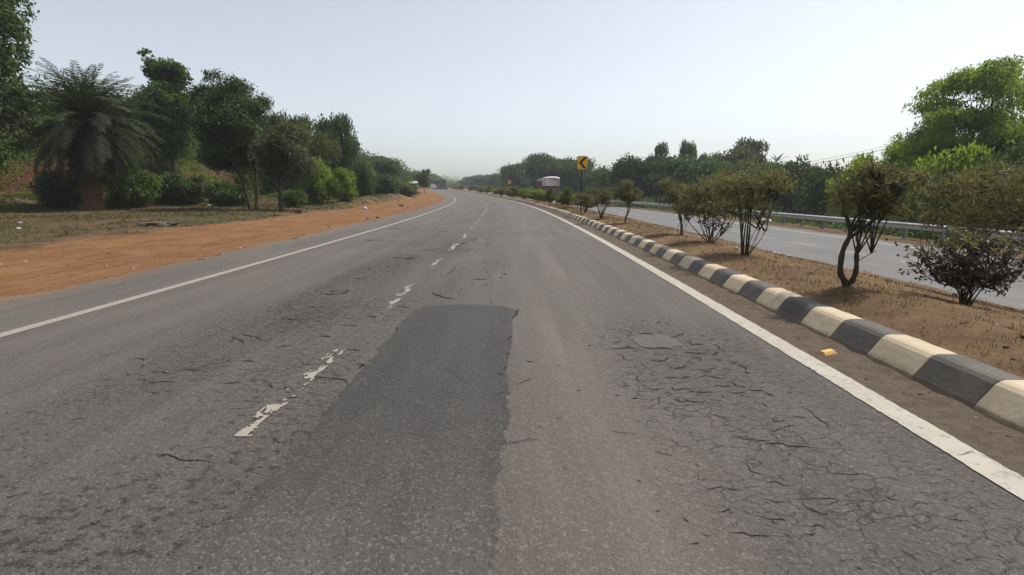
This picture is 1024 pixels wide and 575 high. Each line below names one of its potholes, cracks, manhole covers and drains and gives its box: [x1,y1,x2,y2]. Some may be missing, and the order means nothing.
crack [127,358,201,393]
crack [609,320,841,449]
crack [720,463,837,536]
